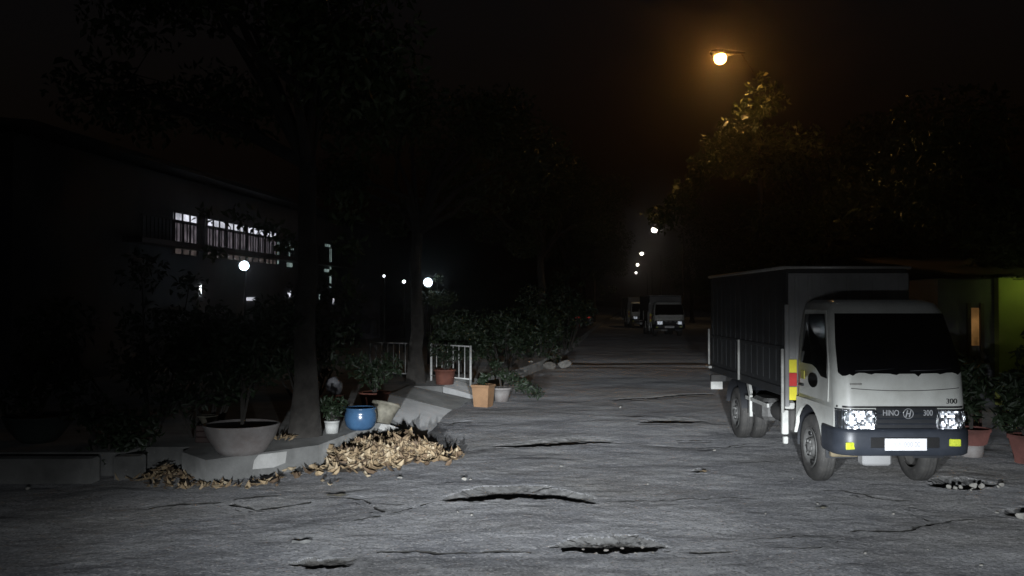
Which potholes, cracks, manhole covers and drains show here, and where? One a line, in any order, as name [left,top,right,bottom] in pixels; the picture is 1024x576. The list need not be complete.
pothole [531,531,683,557]
pothole [428,482,607,506]
crack [140,493,446,524]
pothole [902,474,1019,492]
crack [316,488,986,561]
pothole [625,416,718,425]
pothole [274,549,377,572]
pothole [485,435,625,449]
